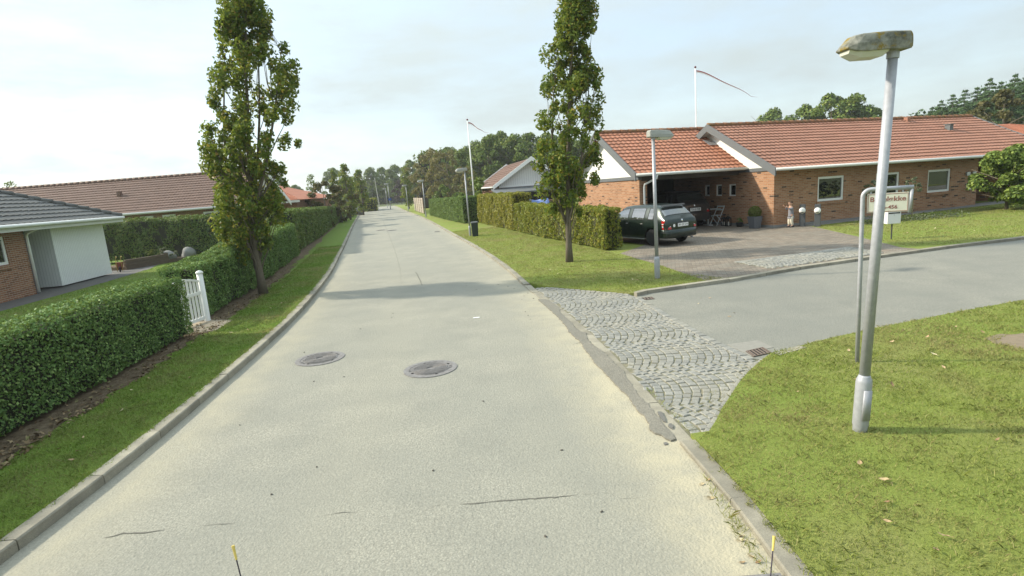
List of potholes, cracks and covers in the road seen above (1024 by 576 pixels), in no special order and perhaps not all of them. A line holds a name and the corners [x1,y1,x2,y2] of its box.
drain grate [746,347,771,357]
manhole cover [295,351,345,367]
crack [436,492,615,506]
crack [104,523,233,538]
manhole cover [403,360,457,378]
